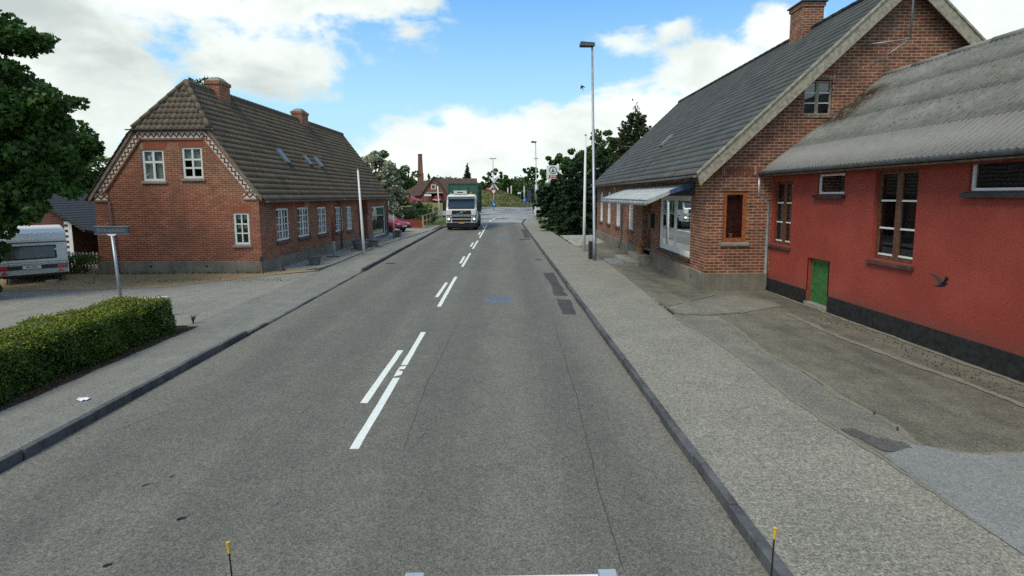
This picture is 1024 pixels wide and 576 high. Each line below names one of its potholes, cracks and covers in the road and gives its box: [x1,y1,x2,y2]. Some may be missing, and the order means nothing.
crack [404,318,461,448]
crack [554,315,624,570]
